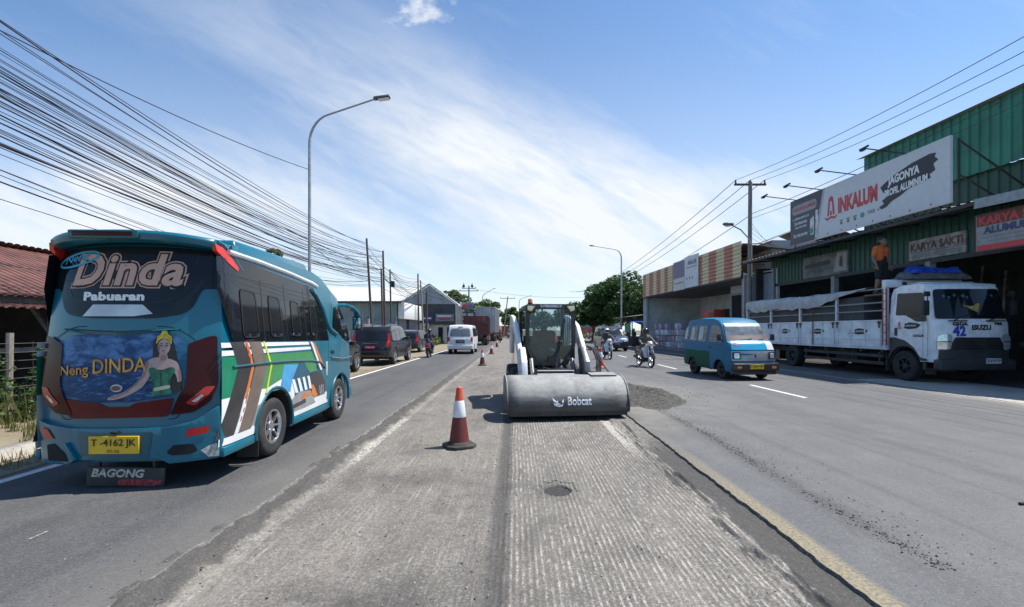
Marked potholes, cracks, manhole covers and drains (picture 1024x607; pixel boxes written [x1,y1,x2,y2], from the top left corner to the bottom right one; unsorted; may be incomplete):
pothole [531,479,582,501]
